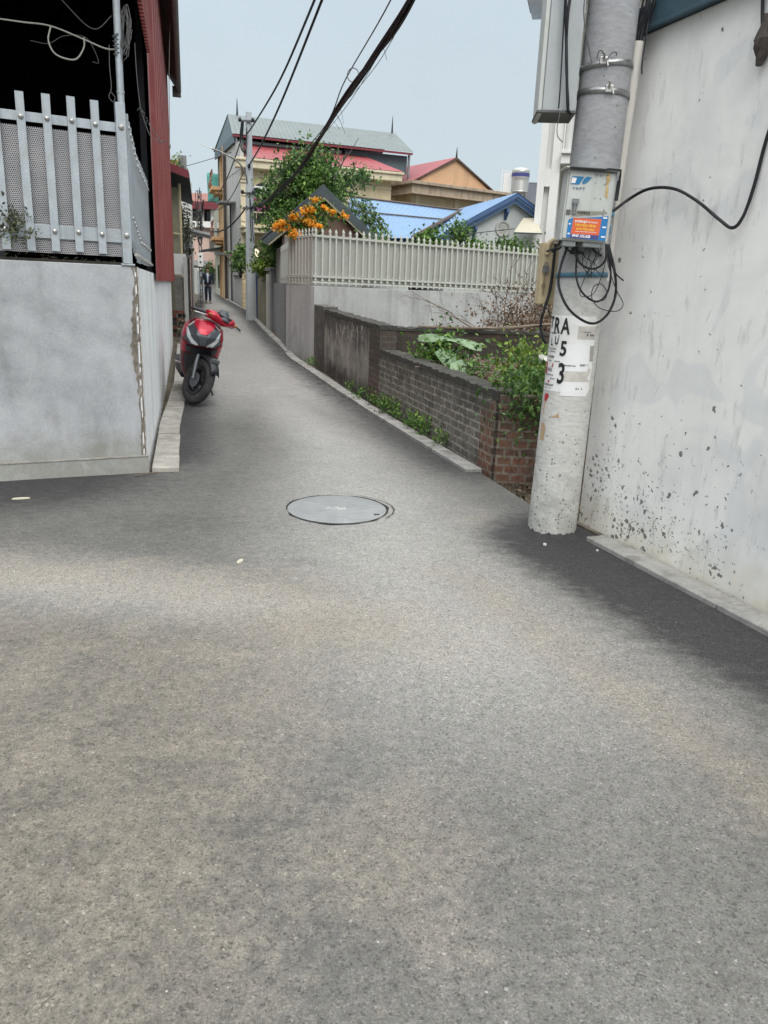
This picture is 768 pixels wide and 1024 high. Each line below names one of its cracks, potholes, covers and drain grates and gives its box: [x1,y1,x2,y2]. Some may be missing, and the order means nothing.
manhole cover [286,495,395,525]
